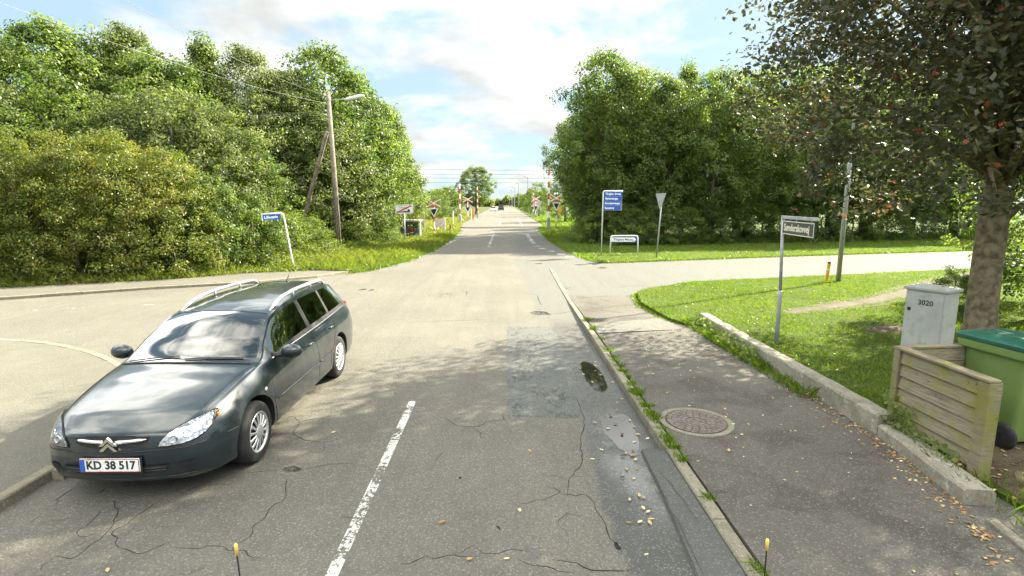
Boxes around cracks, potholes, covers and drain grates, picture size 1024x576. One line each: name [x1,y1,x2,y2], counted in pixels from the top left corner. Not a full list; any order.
crack [30,416,355,570]
crack [408,545,630,573]
crack [522,400,615,542]
manhole cover [659,408,735,437]
